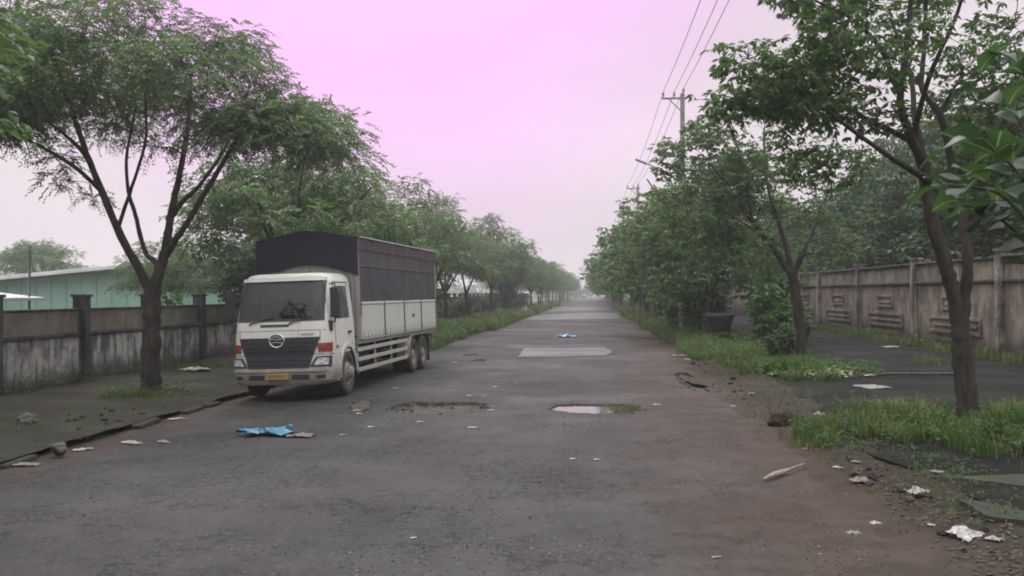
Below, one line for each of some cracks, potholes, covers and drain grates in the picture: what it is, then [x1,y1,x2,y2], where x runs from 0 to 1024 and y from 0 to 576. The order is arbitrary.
pothole [343,399,377,412]
pothole [673,371,722,392]
pothole [385,400,495,415]
pothole [545,403,648,414]
